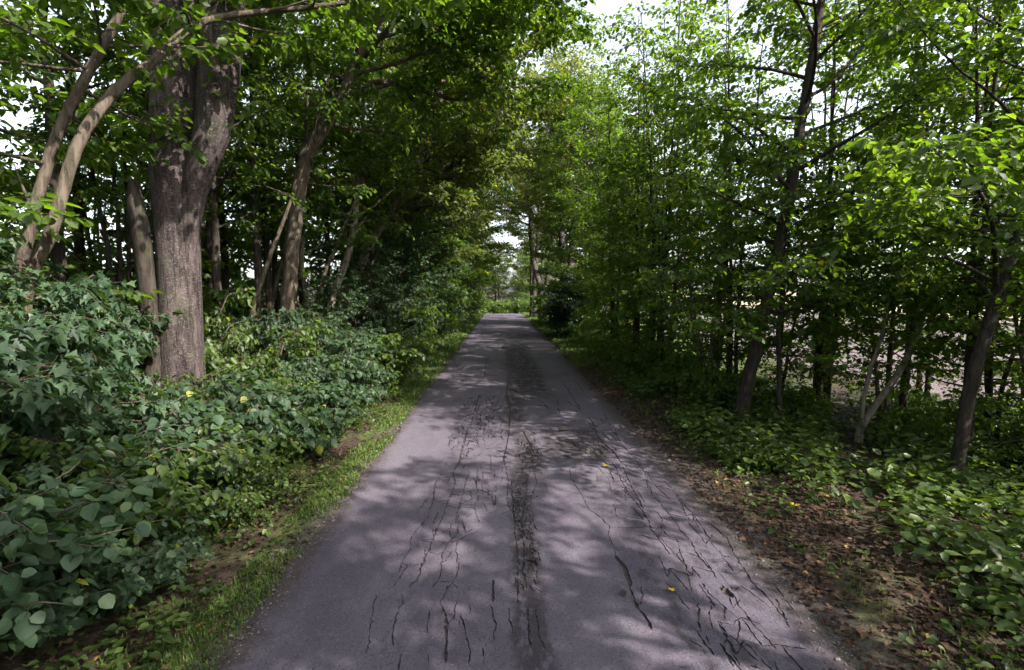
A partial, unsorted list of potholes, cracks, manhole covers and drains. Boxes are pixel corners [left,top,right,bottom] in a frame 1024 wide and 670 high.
crack [543,379,839,670]
crack [365,456,545,670]
crack [448,362,503,463]
